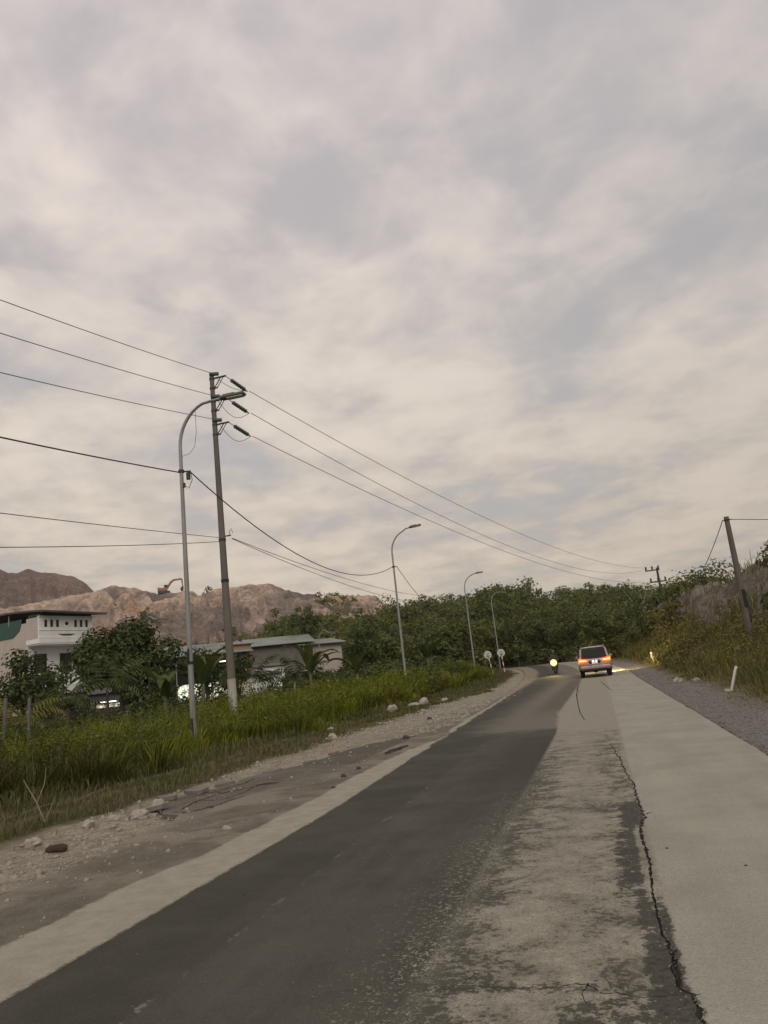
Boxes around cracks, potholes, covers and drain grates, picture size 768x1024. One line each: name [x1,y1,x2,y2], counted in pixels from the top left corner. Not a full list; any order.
crack [180,778,276,813]
crack [351,747,706,1024]
